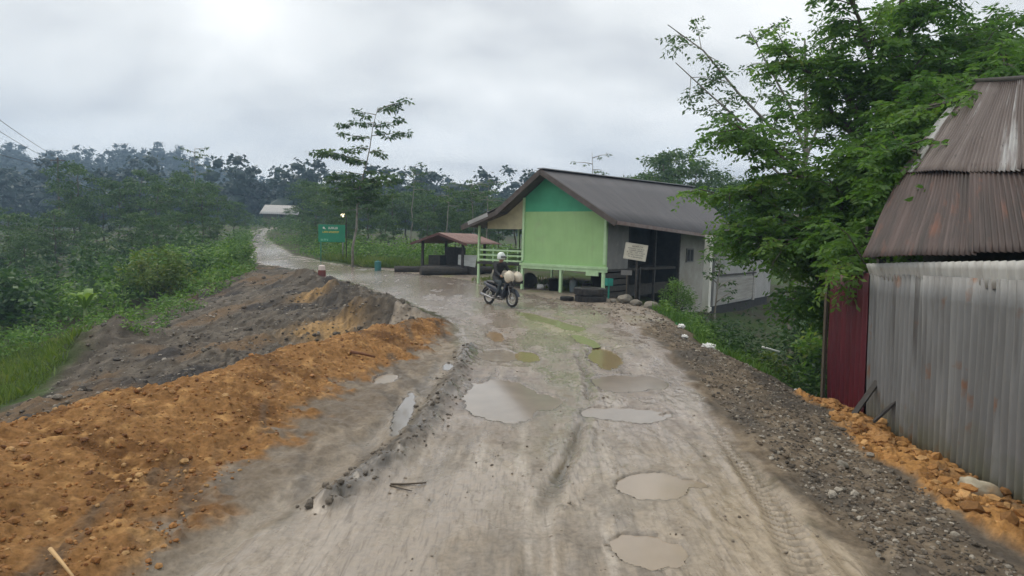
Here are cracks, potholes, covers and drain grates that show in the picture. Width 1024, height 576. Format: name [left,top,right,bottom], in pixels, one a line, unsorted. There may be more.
pothole [386,391,418,445]
pothole [611,469,712,500]
pothole [604,530,697,573]
pothole [585,373,672,393]
pothole [515,350,544,363]
pothole [458,376,570,427]
pothole [577,404,687,425]
pothole [372,371,402,384]
pothole [485,330,507,342]
pothole [584,346,629,373]
